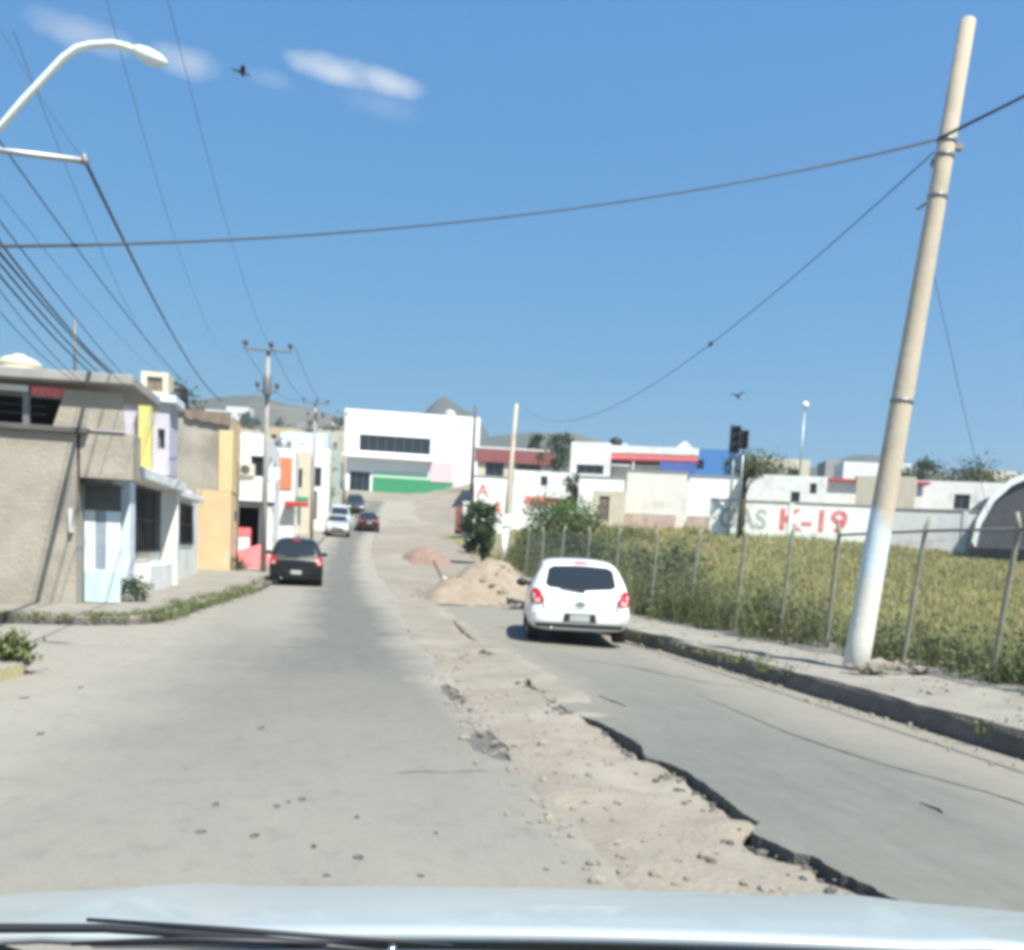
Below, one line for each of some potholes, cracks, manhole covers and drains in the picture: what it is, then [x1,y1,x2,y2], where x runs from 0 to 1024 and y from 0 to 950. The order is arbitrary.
pothole [467,730,511,761]
crack [581,696,901,901]
pothole [441,684,466,705]
crack [560,656,1024,814]
